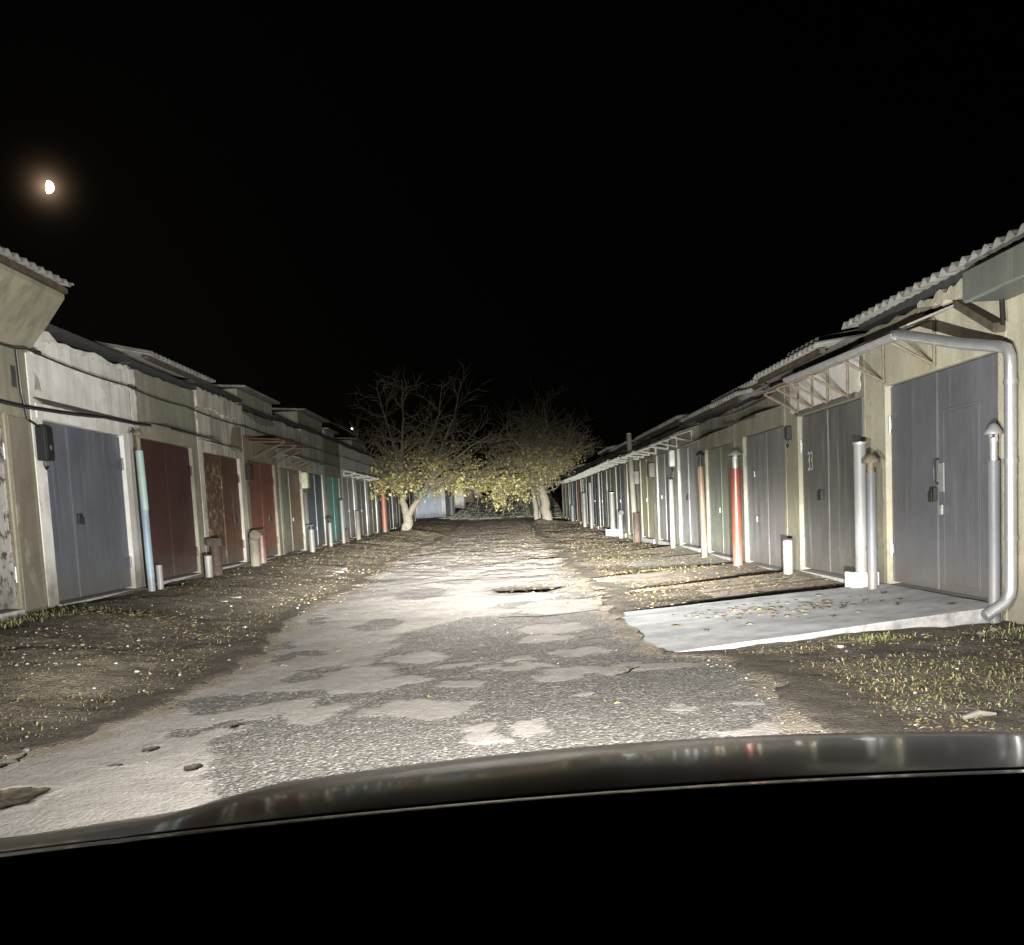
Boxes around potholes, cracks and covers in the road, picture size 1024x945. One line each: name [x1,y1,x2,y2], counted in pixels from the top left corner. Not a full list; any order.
pothole [483,583,575,594]
